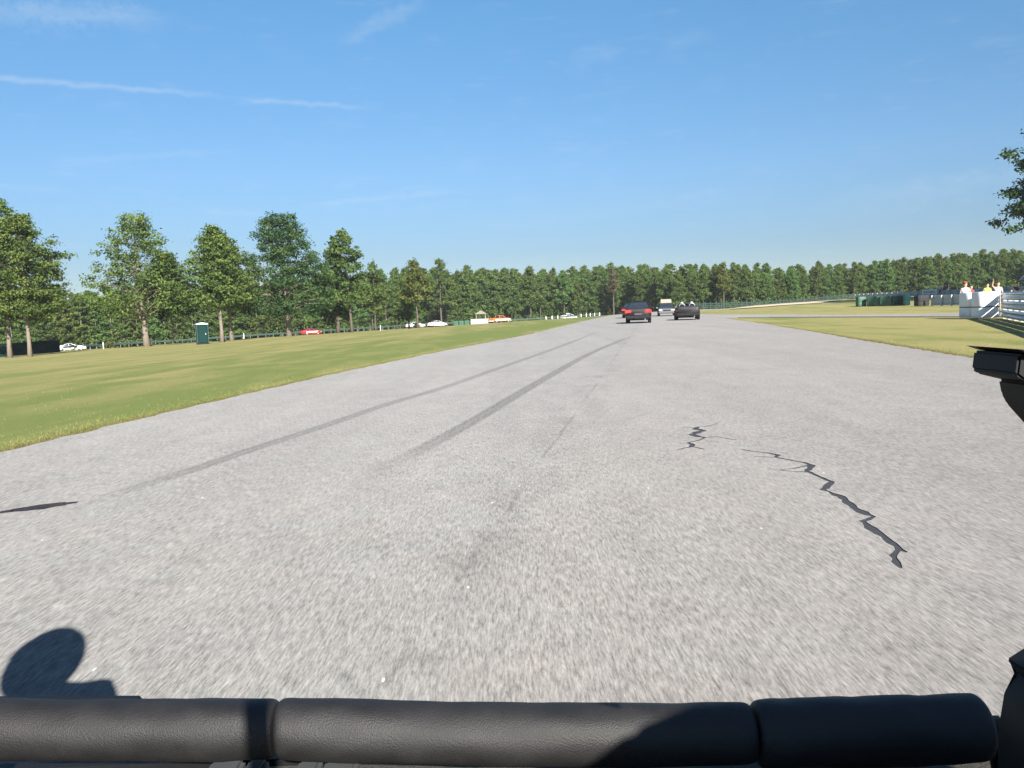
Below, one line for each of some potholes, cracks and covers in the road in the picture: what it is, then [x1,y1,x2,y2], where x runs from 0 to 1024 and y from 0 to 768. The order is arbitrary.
crack [678,424,907,568]
